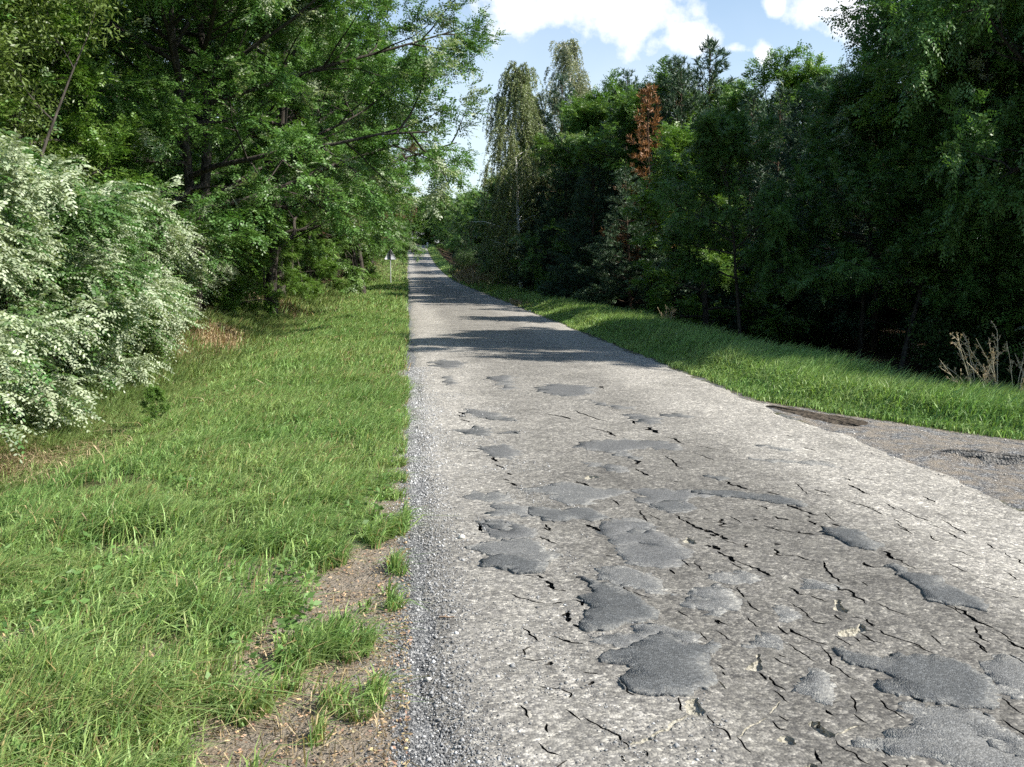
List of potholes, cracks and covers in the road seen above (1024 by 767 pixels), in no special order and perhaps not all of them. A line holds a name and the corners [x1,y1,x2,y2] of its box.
crack [522,624,582,661]
crack [466,451,517,486]
crack [539,672,689,762]
crack [639,478,1024,767]
crack [548,410,732,482]
crack [511,575,584,606]
crack [521,706,567,767]
